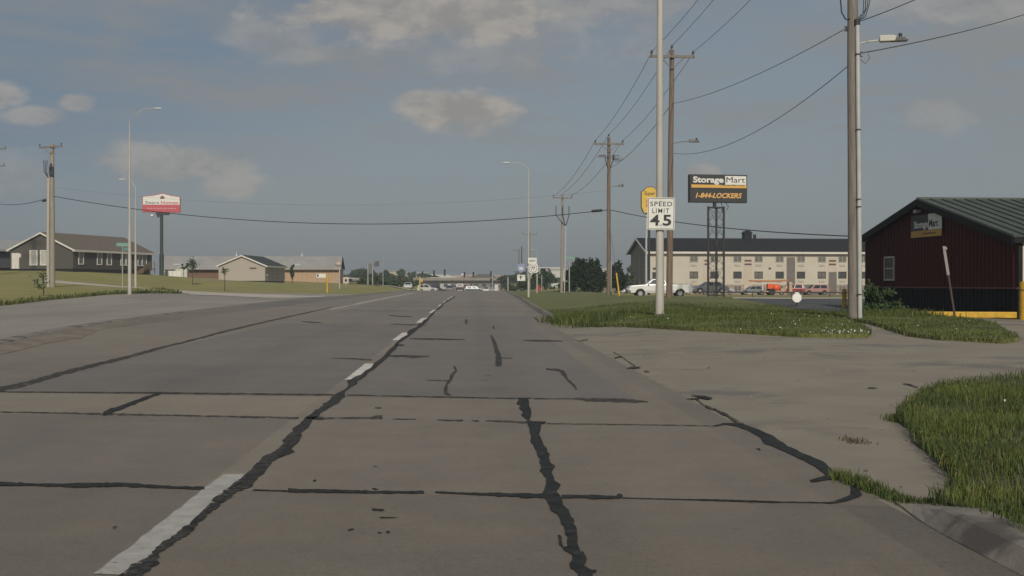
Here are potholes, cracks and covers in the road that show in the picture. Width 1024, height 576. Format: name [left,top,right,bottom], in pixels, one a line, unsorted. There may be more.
crack [687,395,744,424]
